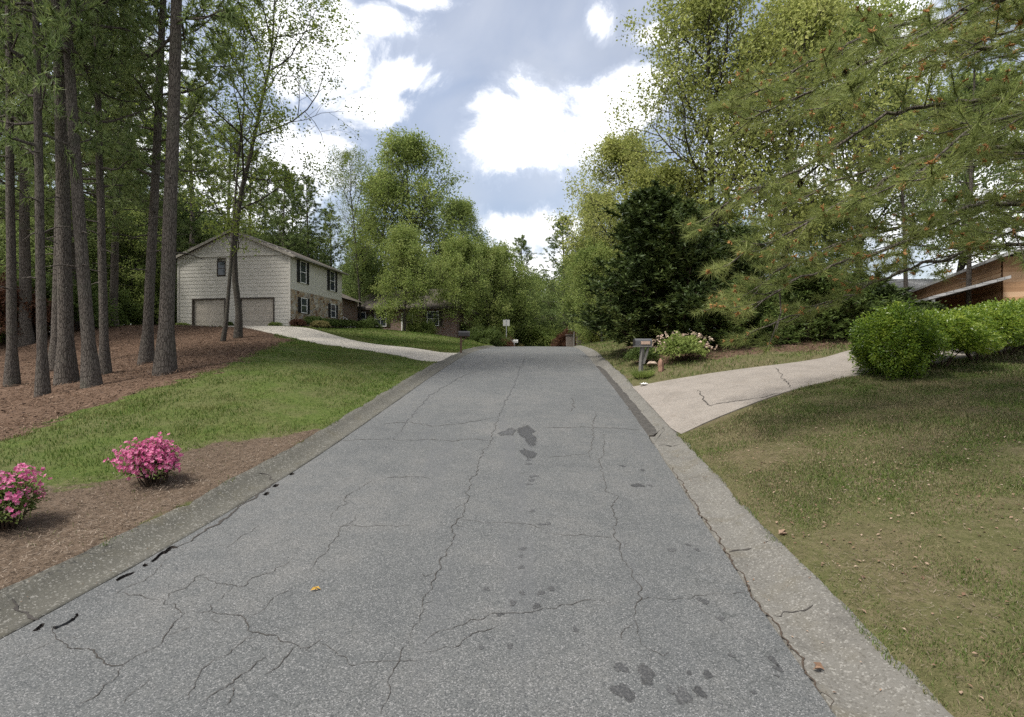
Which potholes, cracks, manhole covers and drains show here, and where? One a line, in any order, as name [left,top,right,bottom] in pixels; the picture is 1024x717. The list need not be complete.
crack [310,476,431,573]
crack [12,564,591,710]
crack [558,399,750,662]
crack [343,357,540,643]
